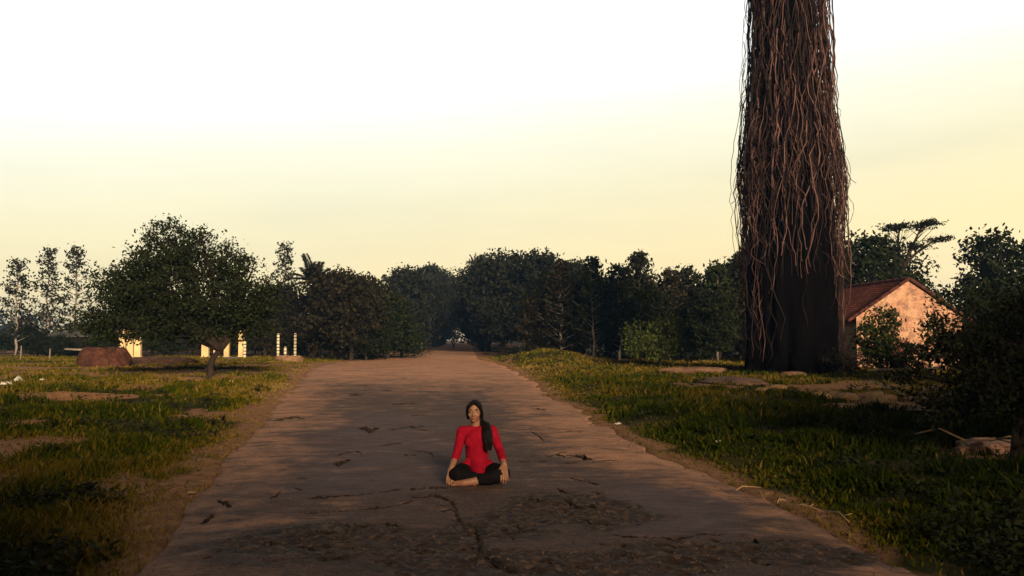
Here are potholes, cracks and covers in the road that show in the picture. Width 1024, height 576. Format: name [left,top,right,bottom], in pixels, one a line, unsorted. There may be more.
crack [269,478,513,574]
crack [517,431,616,525]
crack [358,385,433,456]
